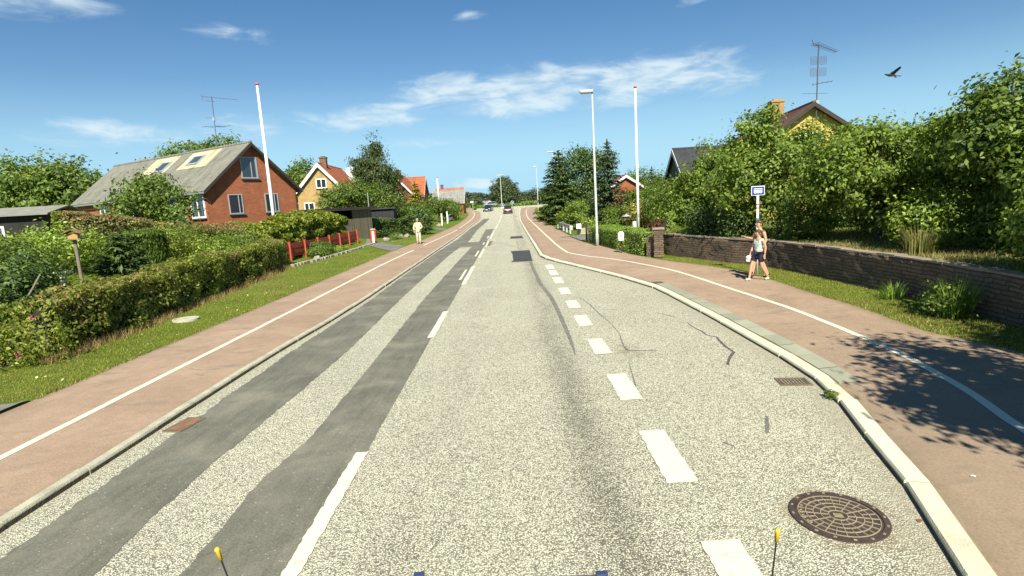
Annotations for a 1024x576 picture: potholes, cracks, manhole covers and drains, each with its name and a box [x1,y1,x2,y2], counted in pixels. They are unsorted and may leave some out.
manhole cover [789,492,892,544]
drain grate [774,377,814,386]
drain grate [162,417,206,433]
crack [578,297,654,390]
